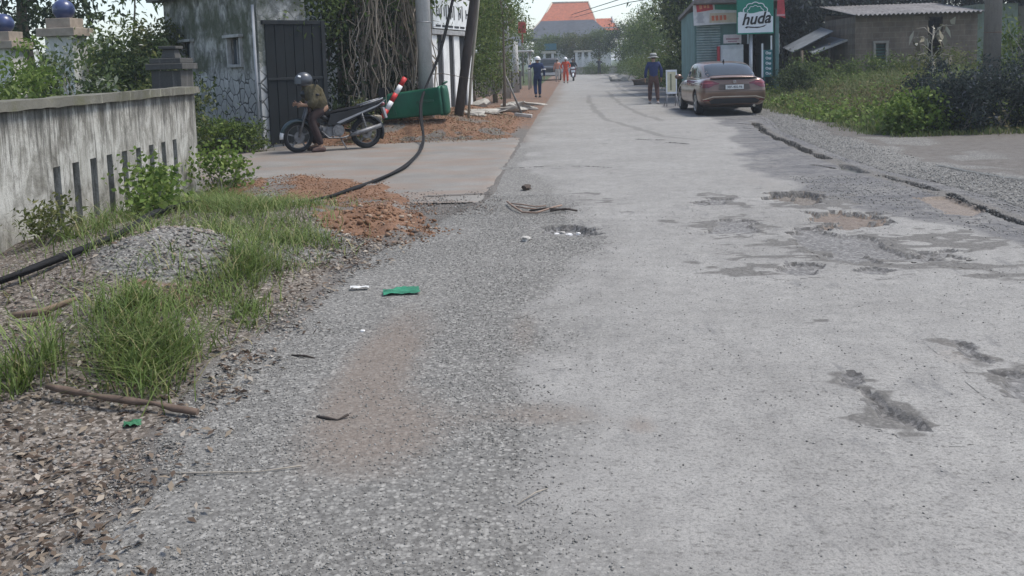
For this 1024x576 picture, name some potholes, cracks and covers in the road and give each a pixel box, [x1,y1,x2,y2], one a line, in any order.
pothole [837,386,980,448]
pothole [902,195,986,219]
pothole [751,189,835,208]
pothole [524,222,623,239]
pothole [916,331,1018,367]
crack [716,118,1024,230]
pothole [791,209,903,232]
